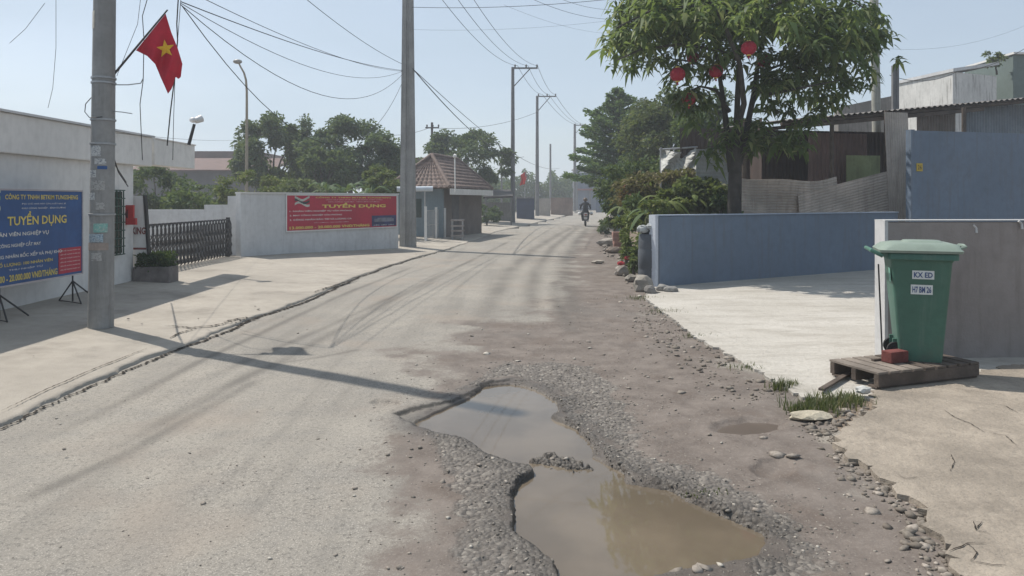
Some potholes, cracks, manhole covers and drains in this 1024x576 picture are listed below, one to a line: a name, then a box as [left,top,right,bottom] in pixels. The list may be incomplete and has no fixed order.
pothole [707,416,792,435]
pothole [748,457,797,480]
crack [949,521,1005,565]
pothole [392,378,774,576]
